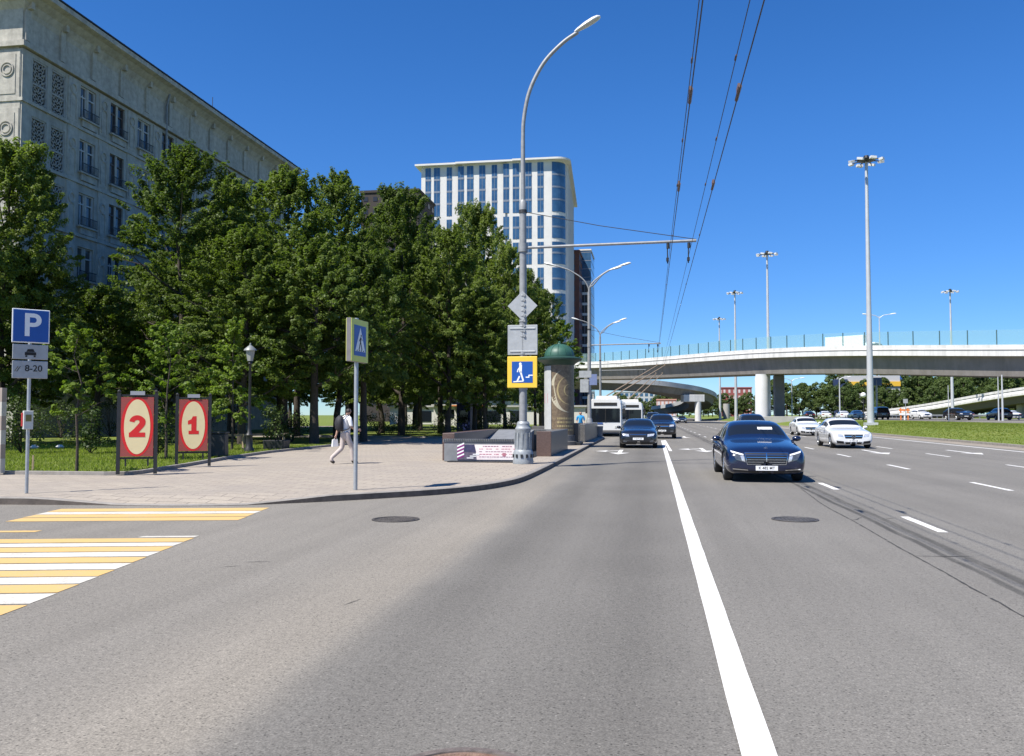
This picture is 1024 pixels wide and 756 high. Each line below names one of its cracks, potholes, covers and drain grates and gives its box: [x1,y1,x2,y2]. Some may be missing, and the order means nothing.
manhole cover [412,747,519,756]
